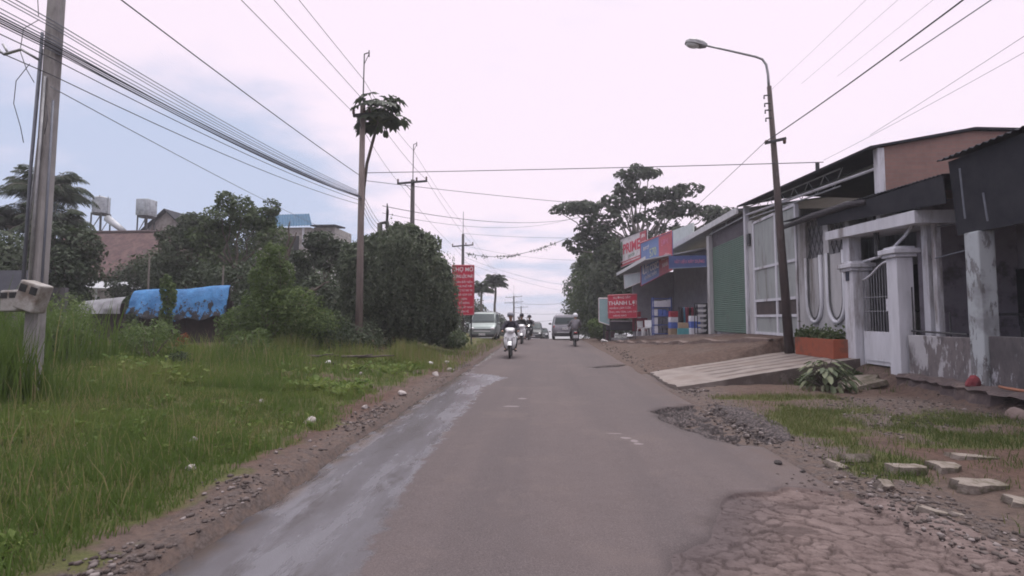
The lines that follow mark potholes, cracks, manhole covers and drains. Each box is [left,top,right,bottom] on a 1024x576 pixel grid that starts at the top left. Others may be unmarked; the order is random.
crack [668,487,1024,576]
pothole [650,404,792,446]
